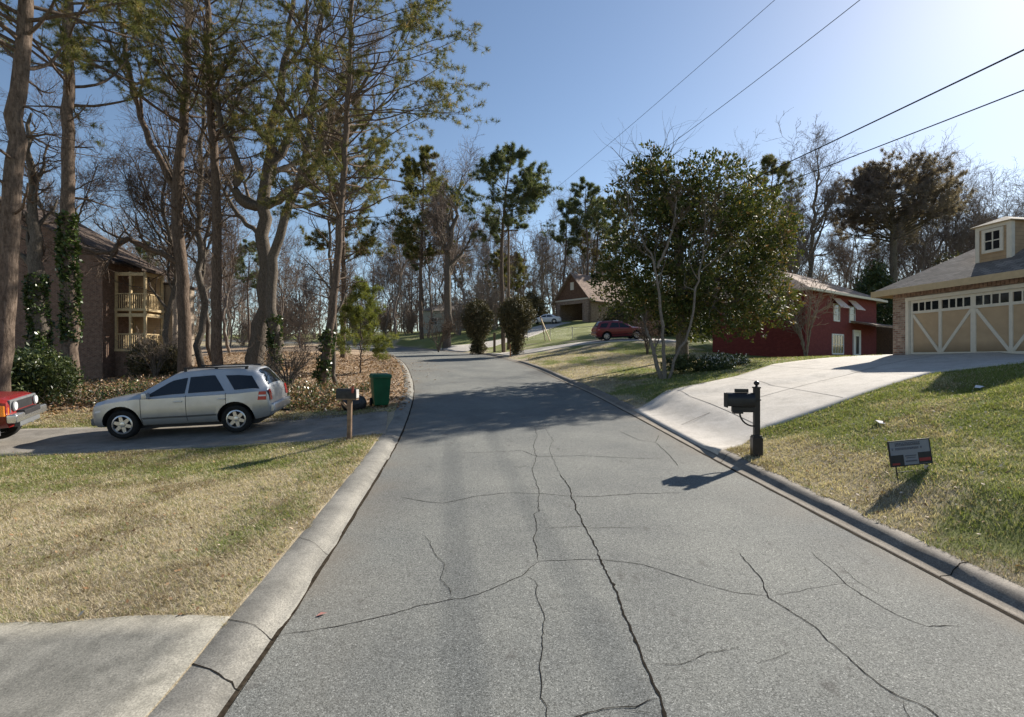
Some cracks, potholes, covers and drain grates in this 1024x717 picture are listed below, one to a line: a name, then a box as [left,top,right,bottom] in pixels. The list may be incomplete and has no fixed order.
crack [293,432,939,717]
crack [814,555,964,646]
